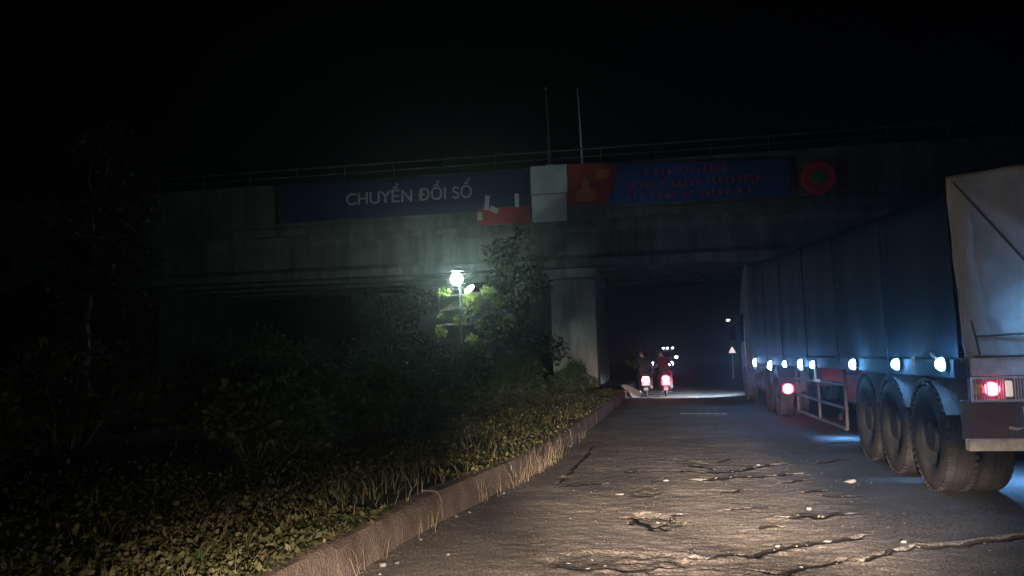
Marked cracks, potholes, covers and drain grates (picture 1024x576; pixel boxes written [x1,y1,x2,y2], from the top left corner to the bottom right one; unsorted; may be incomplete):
crack [556,446,602,487]
crack [681,442,1024,576]
crack [658,514,680,527]
